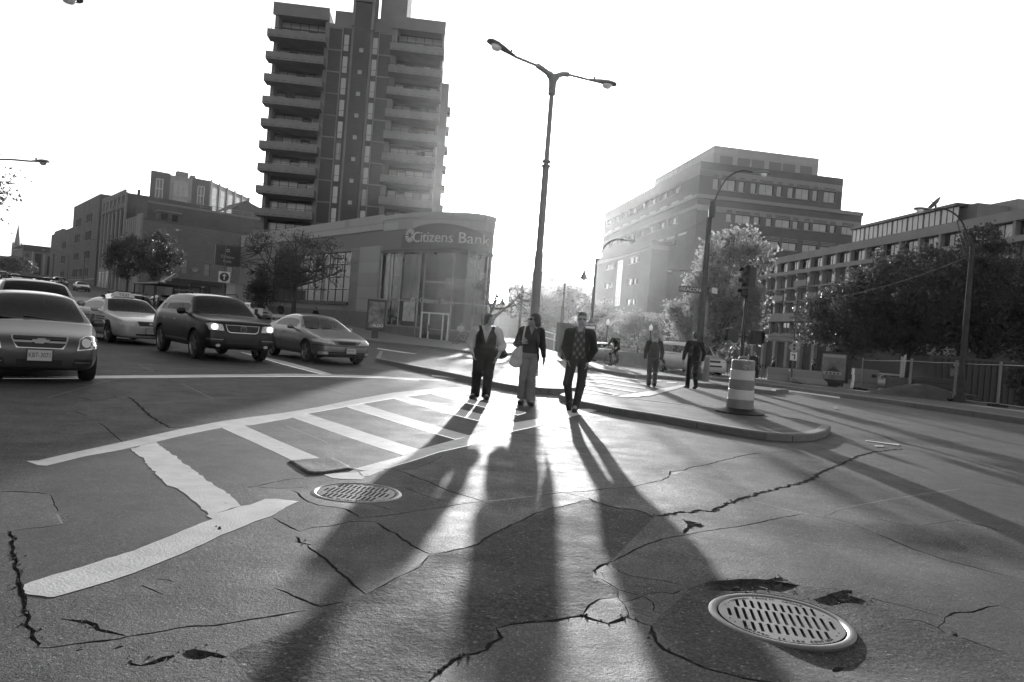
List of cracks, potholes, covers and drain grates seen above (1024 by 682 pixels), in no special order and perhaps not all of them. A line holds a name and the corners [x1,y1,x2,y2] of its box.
crack [0,447,1021,682]
pothole [126,655,175,666]
pothole [808,590,872,606]
crack [56,396,192,442]
pothole [703,574,801,595]
manhole cover [708,593,857,652]
manhole cover [310,483,402,504]
pothole [178,644,226,661]
